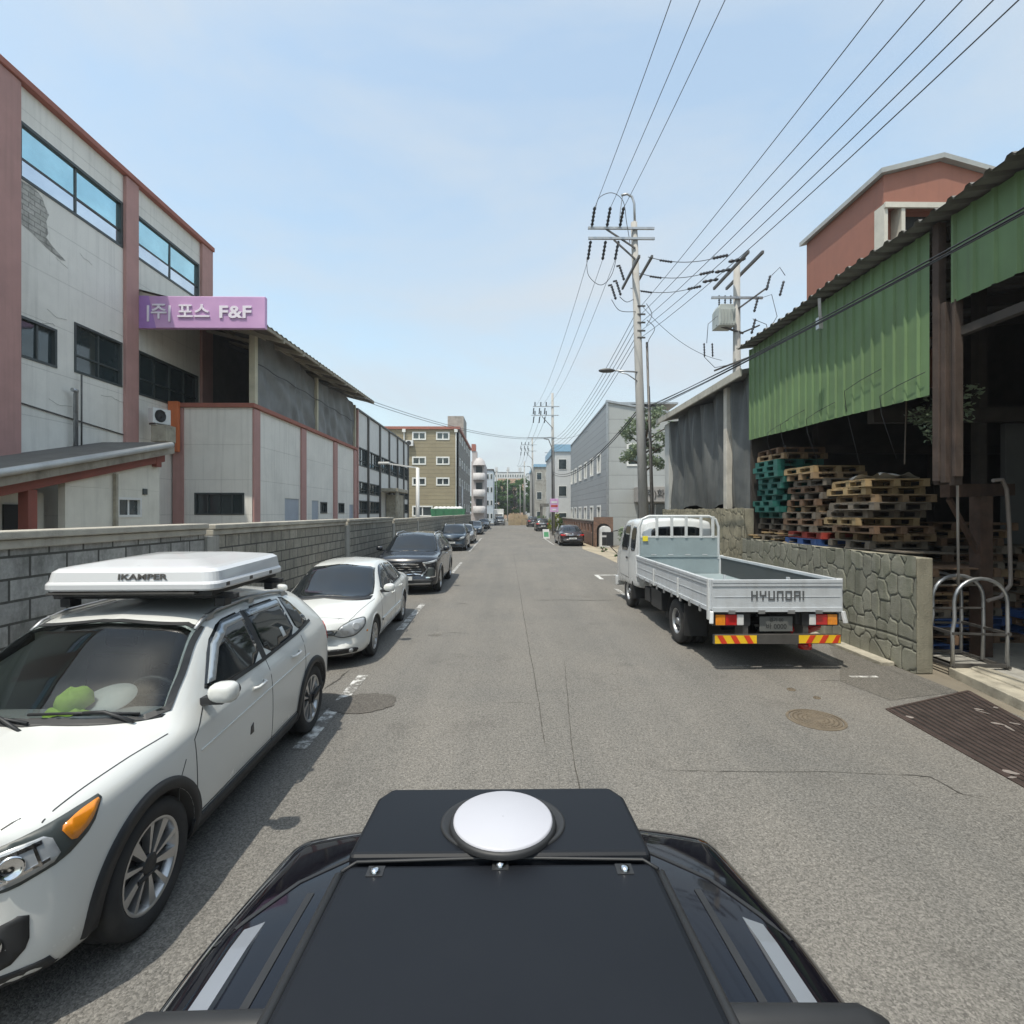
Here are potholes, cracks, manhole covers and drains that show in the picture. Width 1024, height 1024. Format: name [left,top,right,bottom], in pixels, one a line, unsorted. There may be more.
crack [506,554,546,747]
crack [564,662,580,789]
manhole cover [785,709,848,731]
crack [676,770,983,797]
drain grate [886,690,1024,788]
